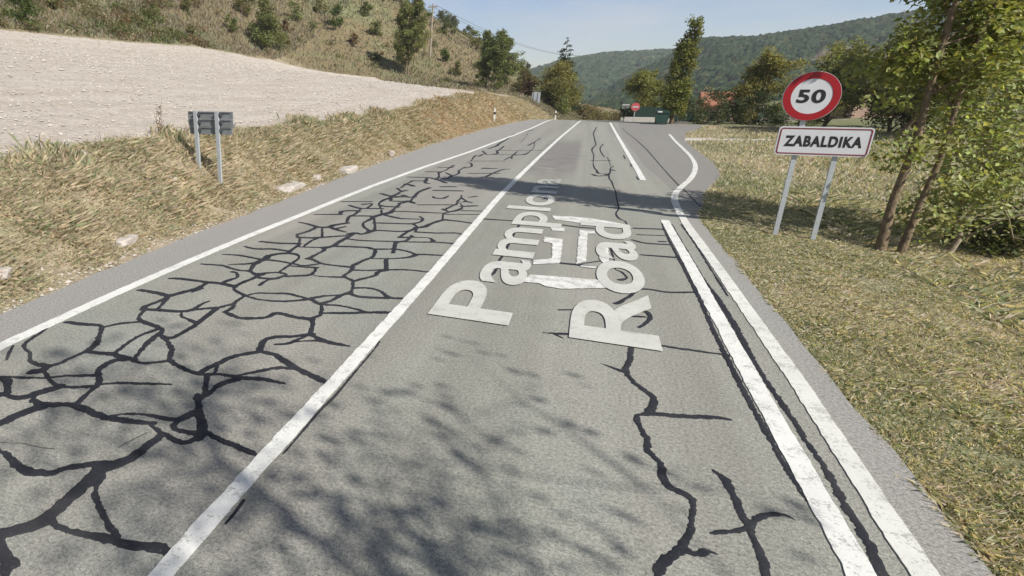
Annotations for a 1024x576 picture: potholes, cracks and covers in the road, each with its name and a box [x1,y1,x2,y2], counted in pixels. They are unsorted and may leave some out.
crack [562,127,680,258]
